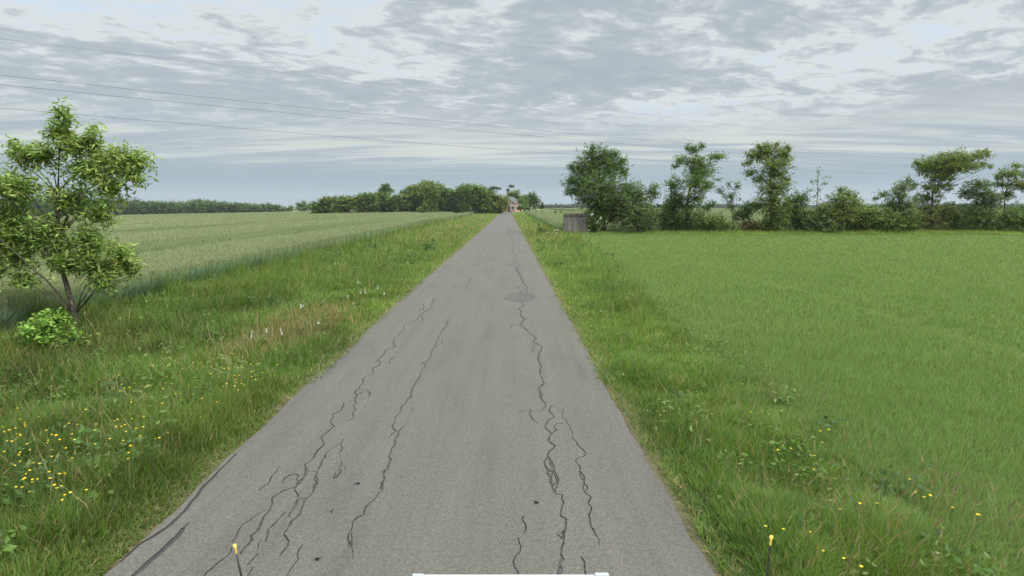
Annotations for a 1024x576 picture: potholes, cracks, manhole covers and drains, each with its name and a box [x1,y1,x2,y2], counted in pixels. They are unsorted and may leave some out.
crack [113,297,449,576]
crack [507,219,600,575]
